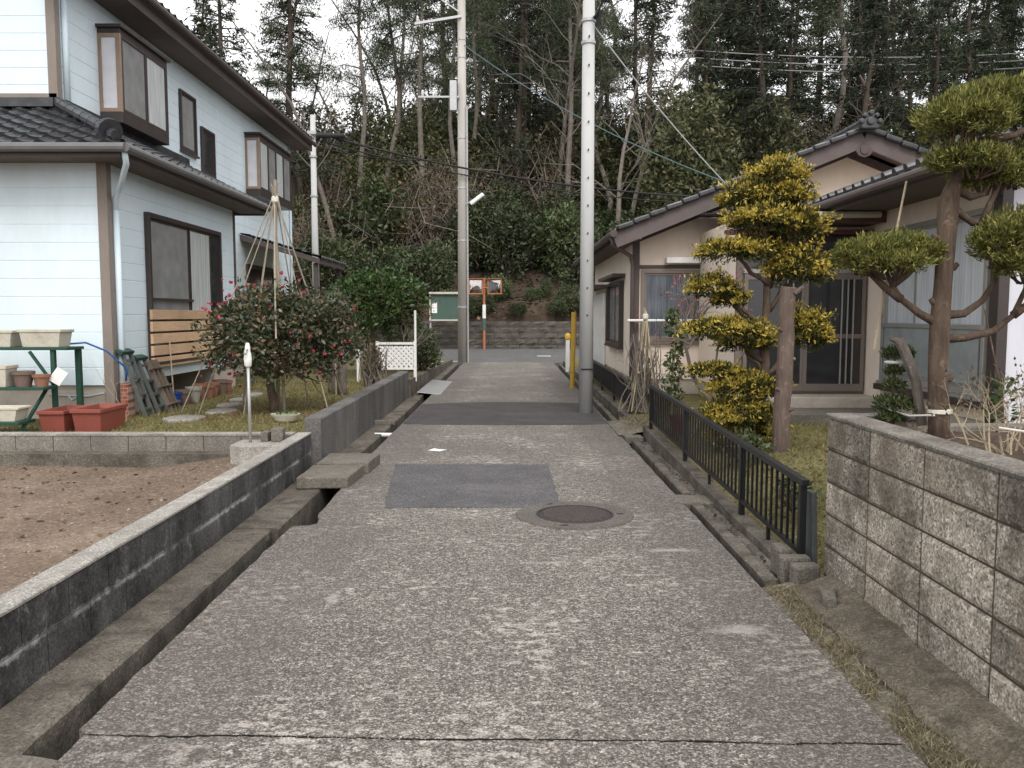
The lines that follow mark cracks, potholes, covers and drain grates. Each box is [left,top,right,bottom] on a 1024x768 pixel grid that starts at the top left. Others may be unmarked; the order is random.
crack [89,734,902,745]
manhole cover [515,501,634,530]
